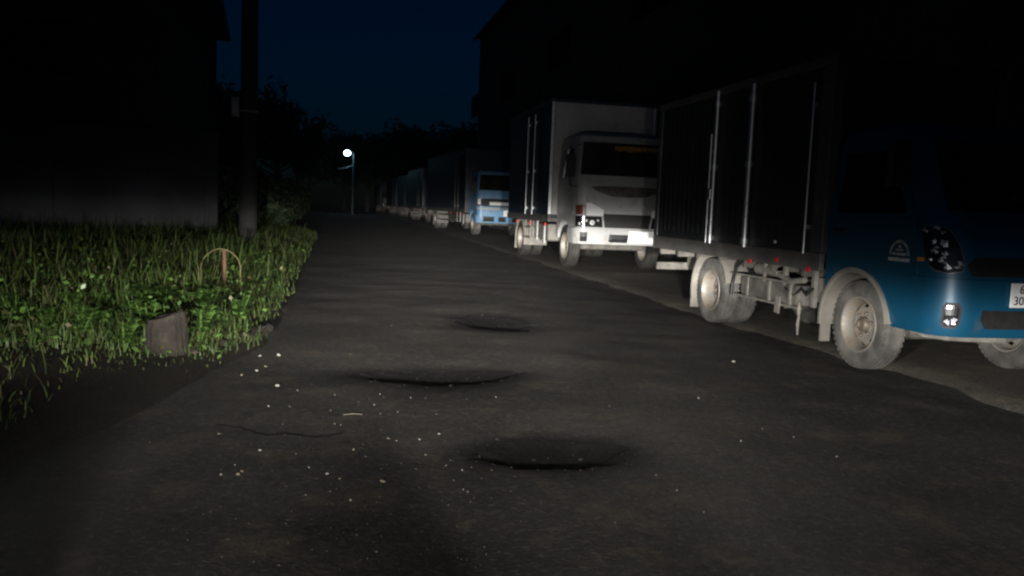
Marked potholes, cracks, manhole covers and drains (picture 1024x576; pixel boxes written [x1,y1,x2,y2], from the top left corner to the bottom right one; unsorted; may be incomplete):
pothole [468,437,636,471]
pothole [350,369,528,386]
pothole [453,315,532,332]
crack [216,424,347,437]
